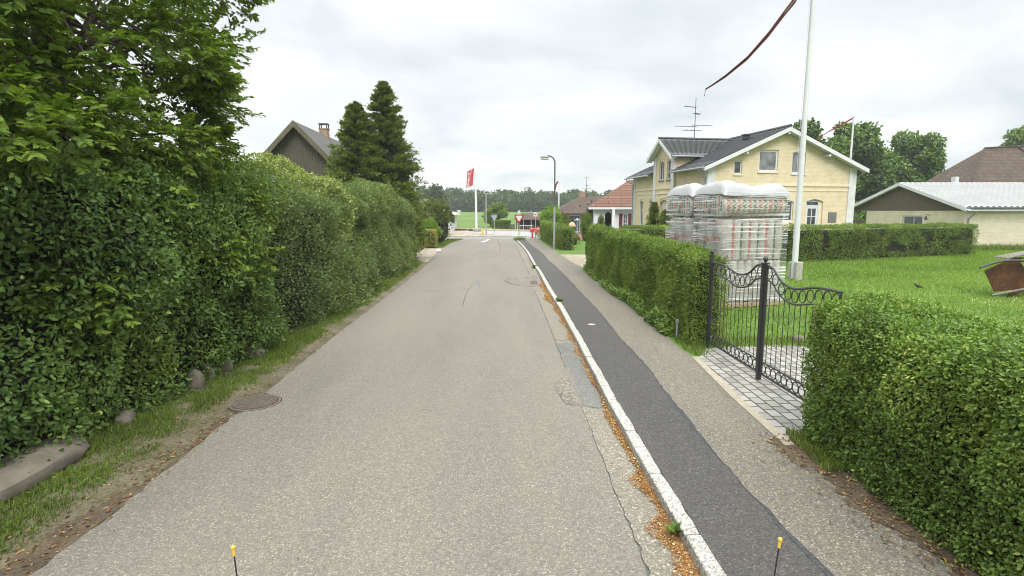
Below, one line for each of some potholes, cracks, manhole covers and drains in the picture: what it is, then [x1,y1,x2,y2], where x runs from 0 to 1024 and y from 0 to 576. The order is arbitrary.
manhole cover [228,394,281,413]
